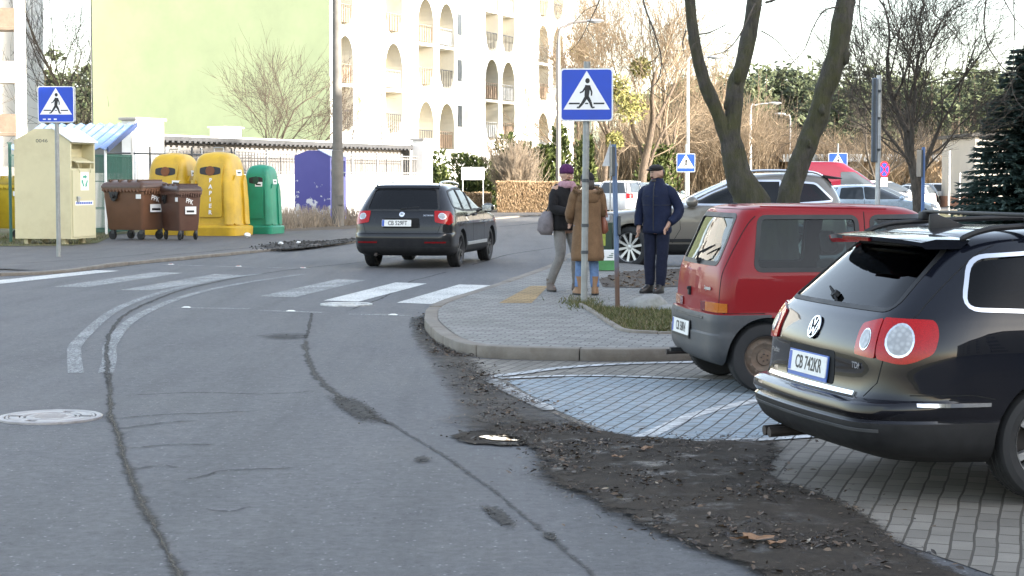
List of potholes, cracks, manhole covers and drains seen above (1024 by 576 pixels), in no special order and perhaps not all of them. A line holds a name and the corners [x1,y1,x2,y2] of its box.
manhole cover [0,409,103,425]
crack [104,276,594,576]
pothole [440,430,528,447]
